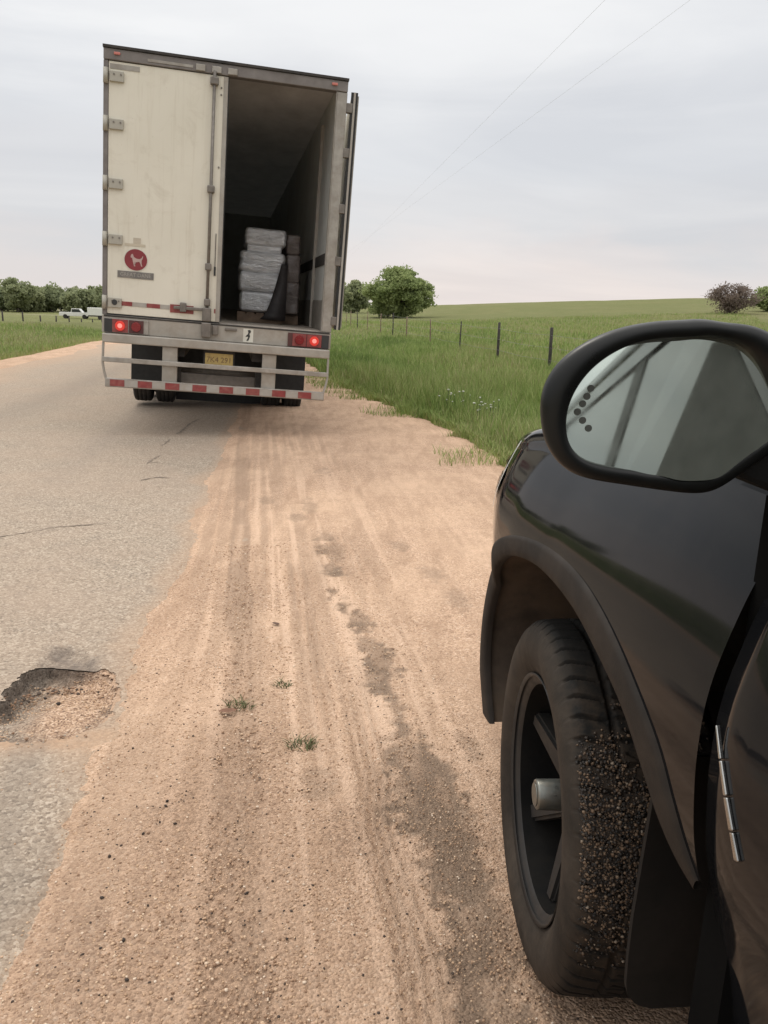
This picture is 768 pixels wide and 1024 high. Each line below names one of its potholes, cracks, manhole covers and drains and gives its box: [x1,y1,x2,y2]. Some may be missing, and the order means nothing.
crack [141,419,200,481]
pothole [0,668,118,743]
